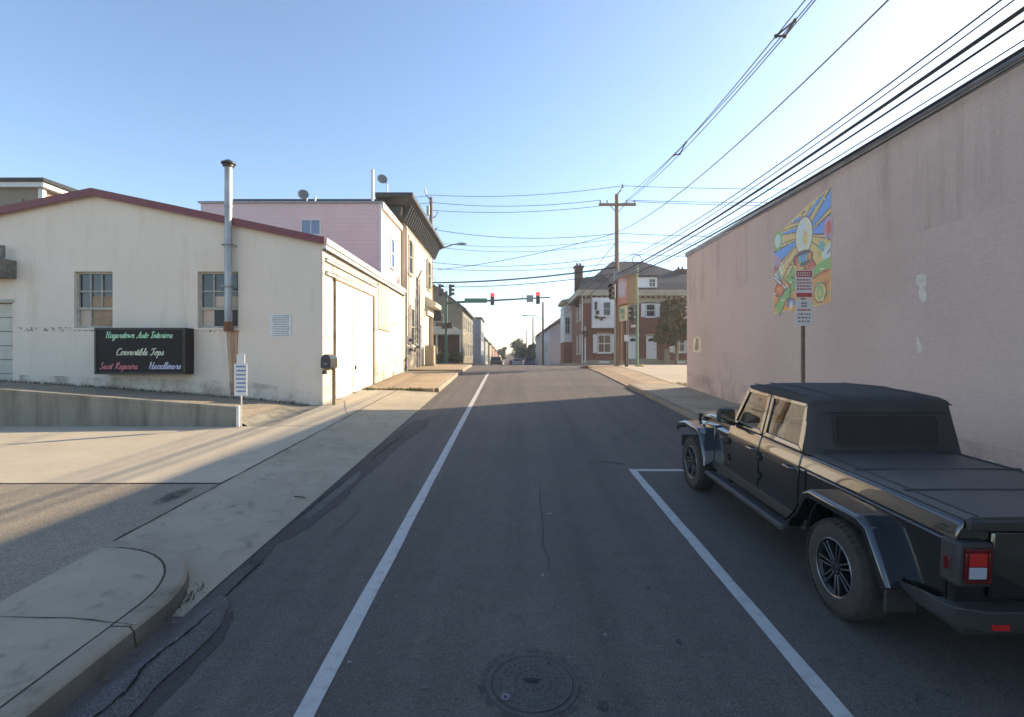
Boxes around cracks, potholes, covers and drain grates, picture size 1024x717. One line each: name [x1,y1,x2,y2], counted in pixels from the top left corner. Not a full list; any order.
crack [539,485,550,574]
manhole cover [485,653,580,717]
